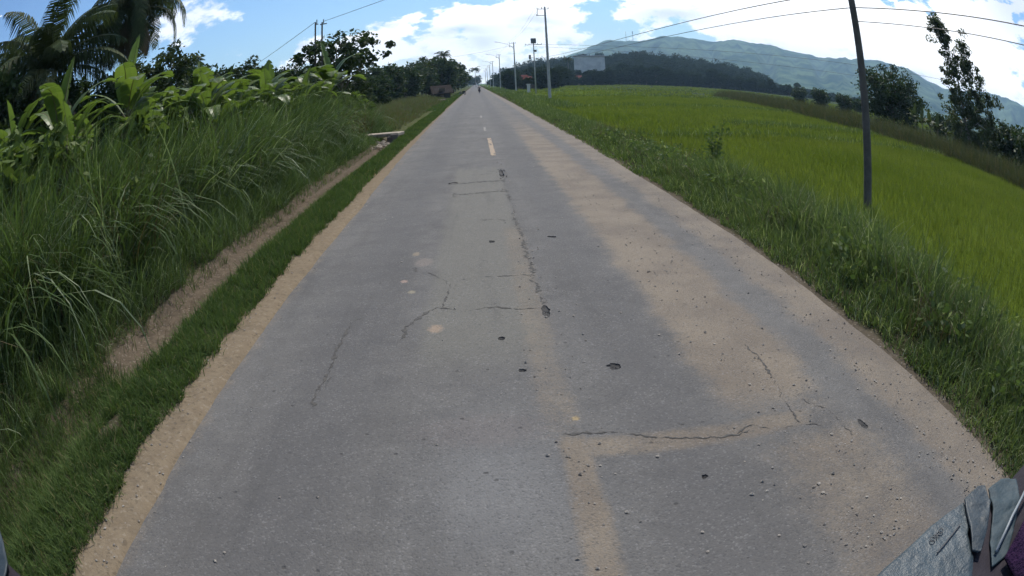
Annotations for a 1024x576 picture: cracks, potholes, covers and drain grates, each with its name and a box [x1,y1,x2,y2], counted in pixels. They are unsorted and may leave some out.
crack [310,318,362,406]
crack [400,173,546,340]
crack [564,344,852,439]
